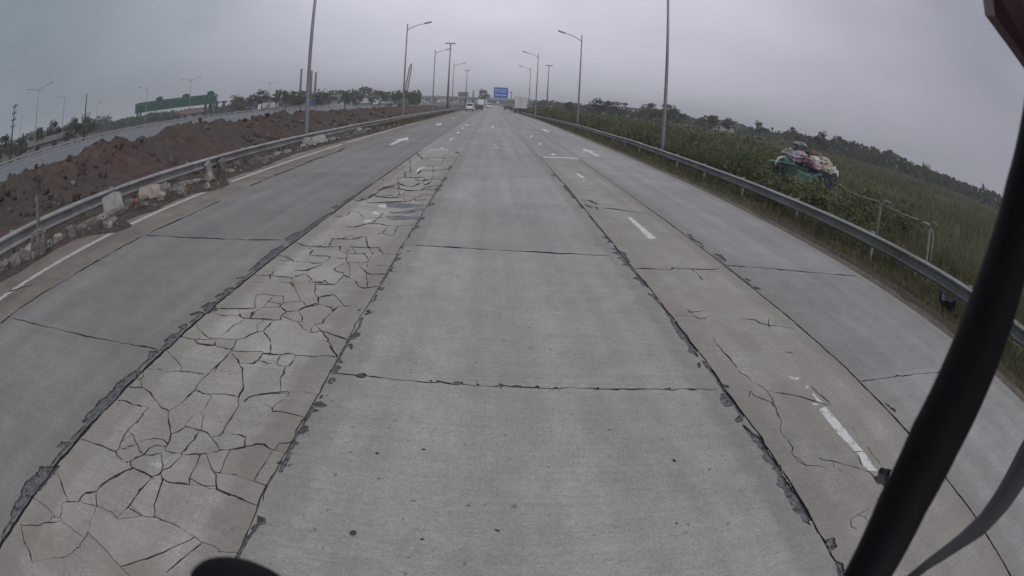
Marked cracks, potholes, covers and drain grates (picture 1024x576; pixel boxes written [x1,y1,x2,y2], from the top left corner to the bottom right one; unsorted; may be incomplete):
crack [20,154,450,576]
crack [713,338,880,477]
crack [636,267,720,280]
